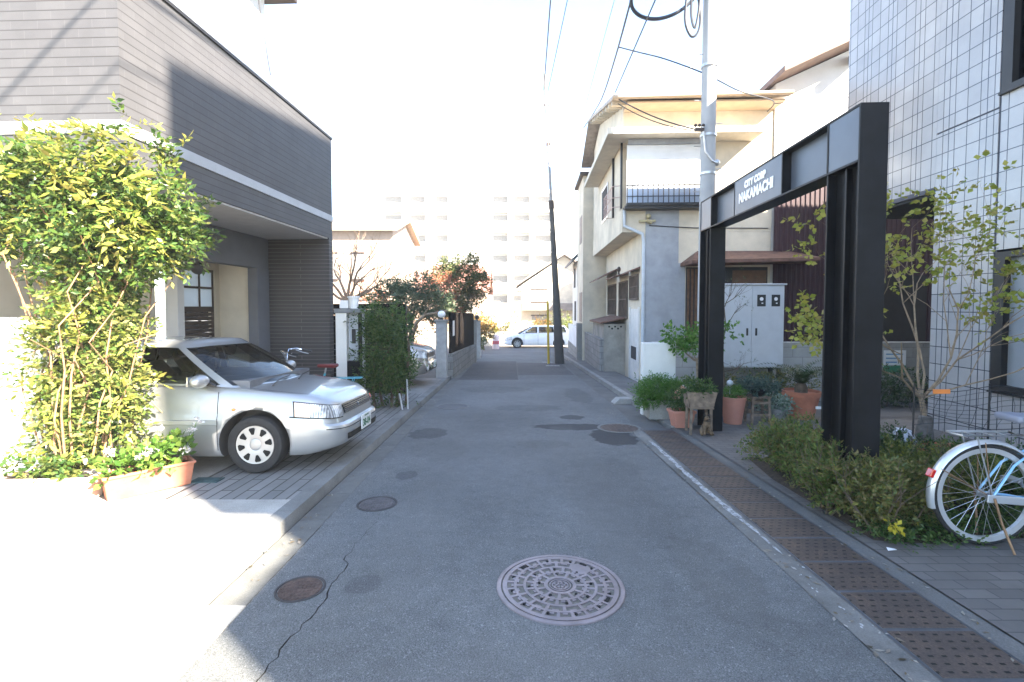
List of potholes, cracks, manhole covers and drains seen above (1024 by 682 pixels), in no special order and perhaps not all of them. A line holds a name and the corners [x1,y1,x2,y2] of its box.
manhole cover [274,575,326,603]
crack [256,514,382,682]
manhole cover [597,423,641,433]
manhole cover [497,555,625,626]
manhole cover [356,496,397,512]
